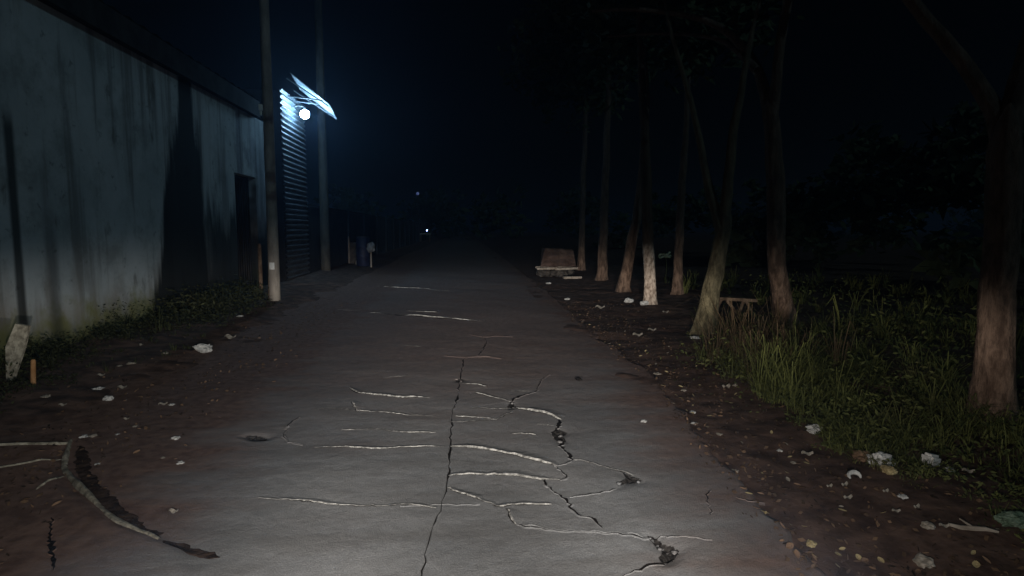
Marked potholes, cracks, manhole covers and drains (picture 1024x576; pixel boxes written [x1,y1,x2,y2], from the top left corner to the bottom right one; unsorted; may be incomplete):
pothole [617,473,641,485]
pothole [648,536,679,564]
crack [258,311,712,576]
crack [0,439,160,572]
